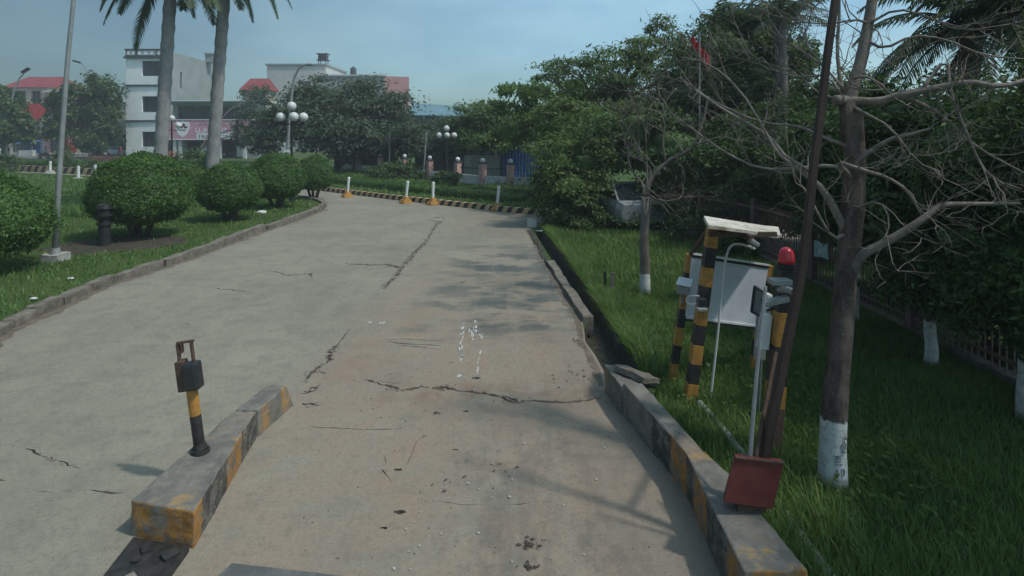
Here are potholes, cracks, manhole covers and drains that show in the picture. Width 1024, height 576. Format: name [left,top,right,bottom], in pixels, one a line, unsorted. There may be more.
crack [346,217,445,289]
crack [301,330,349,408]
crack [26,448,80,469]
